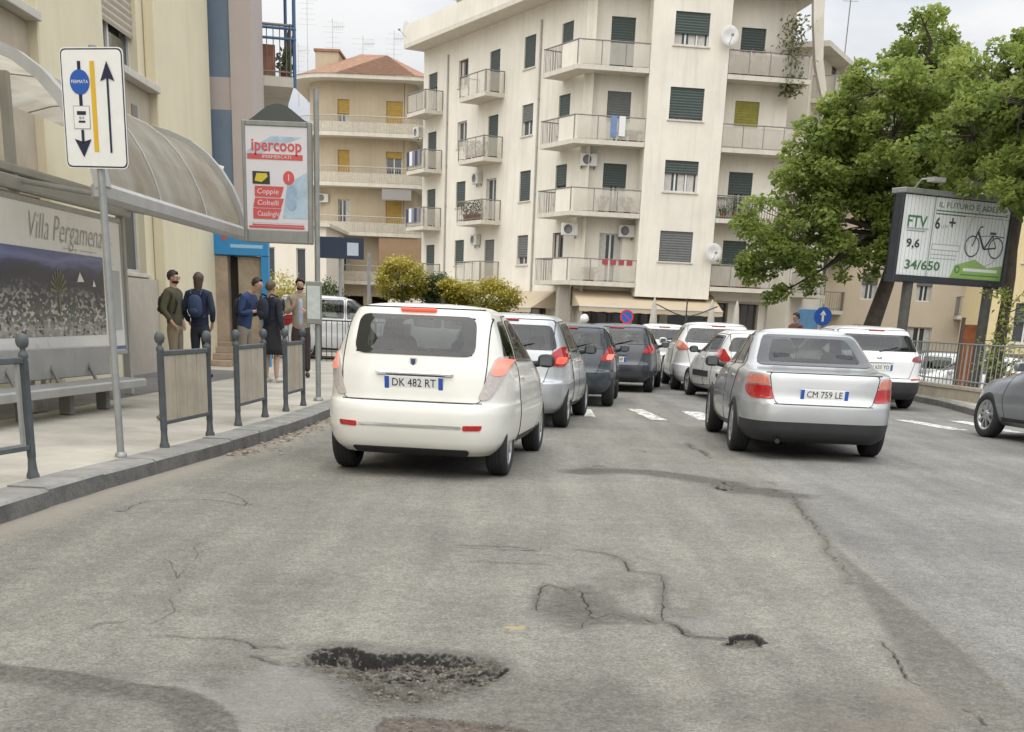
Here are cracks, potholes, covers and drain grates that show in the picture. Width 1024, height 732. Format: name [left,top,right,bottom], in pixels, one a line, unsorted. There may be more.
pothole [281,641,528,712]
crack [574,442,794,494]
pothole [710,632,777,652]
crack [528,548,729,644]
crack [81,541,307,668]
crack [115,489,261,512]
crack [951,706,998,729]
